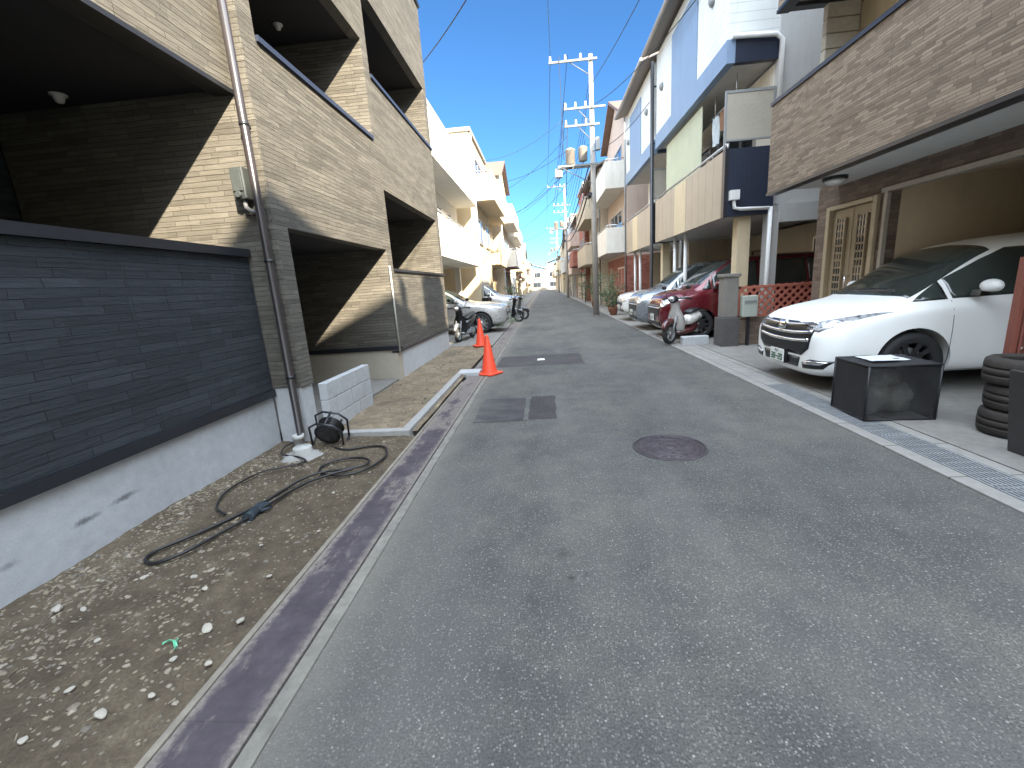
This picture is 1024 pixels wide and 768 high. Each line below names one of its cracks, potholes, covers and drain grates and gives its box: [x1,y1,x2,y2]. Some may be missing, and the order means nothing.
drain grate [812,404,910,436]
drain grate [767,384,831,406]
manhole cover [632,434,709,461]
drain grate [880,435,1024,489]
drain grate [996,487,1024,501]
